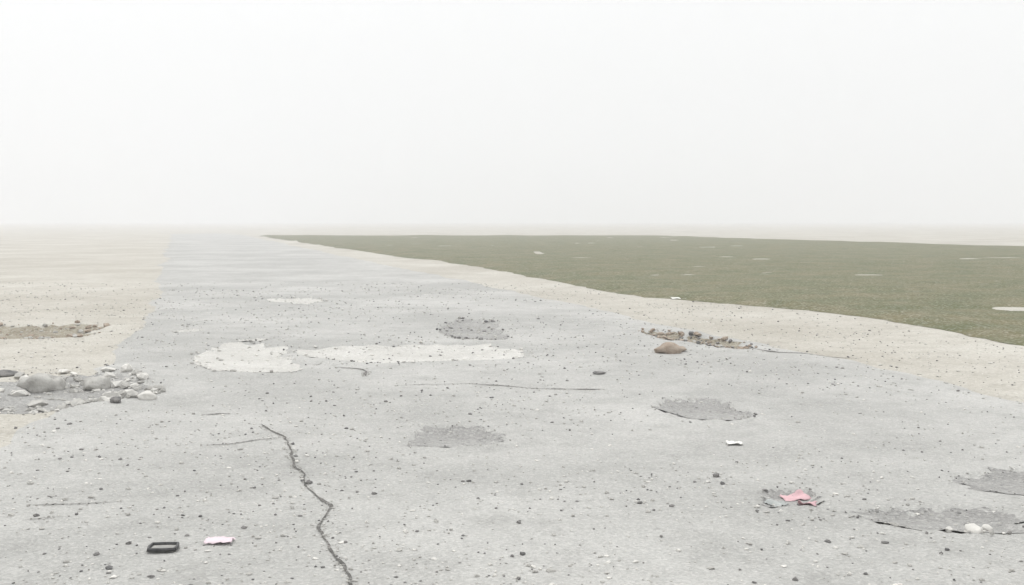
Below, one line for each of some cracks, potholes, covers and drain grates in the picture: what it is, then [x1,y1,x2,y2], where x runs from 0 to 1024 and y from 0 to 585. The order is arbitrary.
crack [200,424,359,585]
